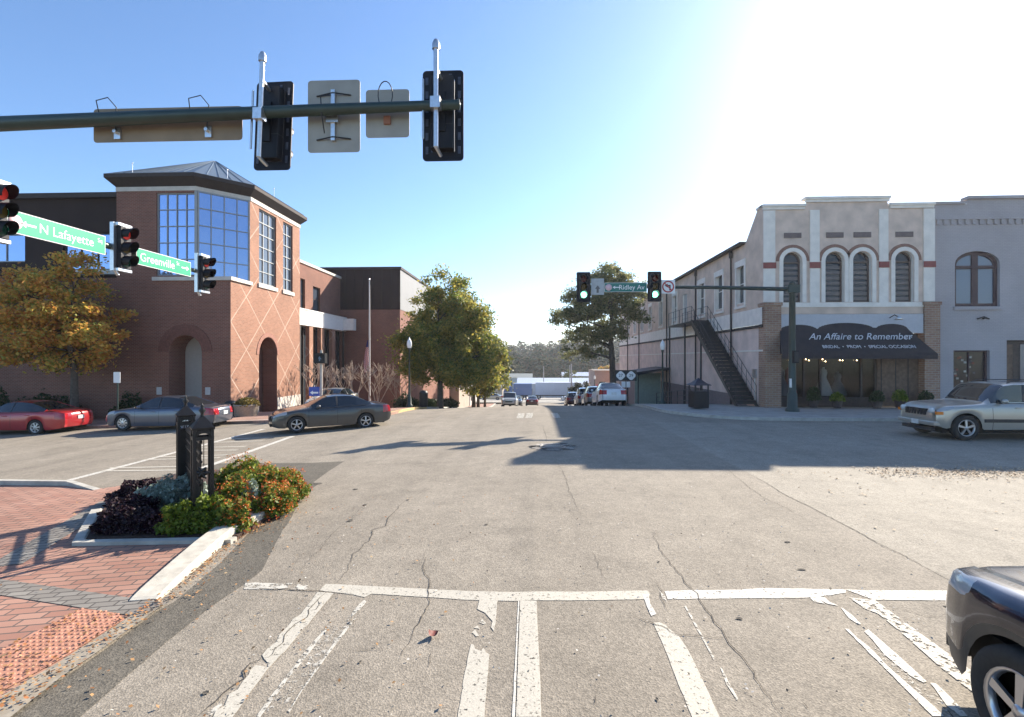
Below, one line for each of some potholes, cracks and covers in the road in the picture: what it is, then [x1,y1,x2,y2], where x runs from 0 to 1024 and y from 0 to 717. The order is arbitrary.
crack [399,555,430,660]
manhole cover [531,443,579,451]
crack [304,499,407,578]
crack [636,540,783,715]
